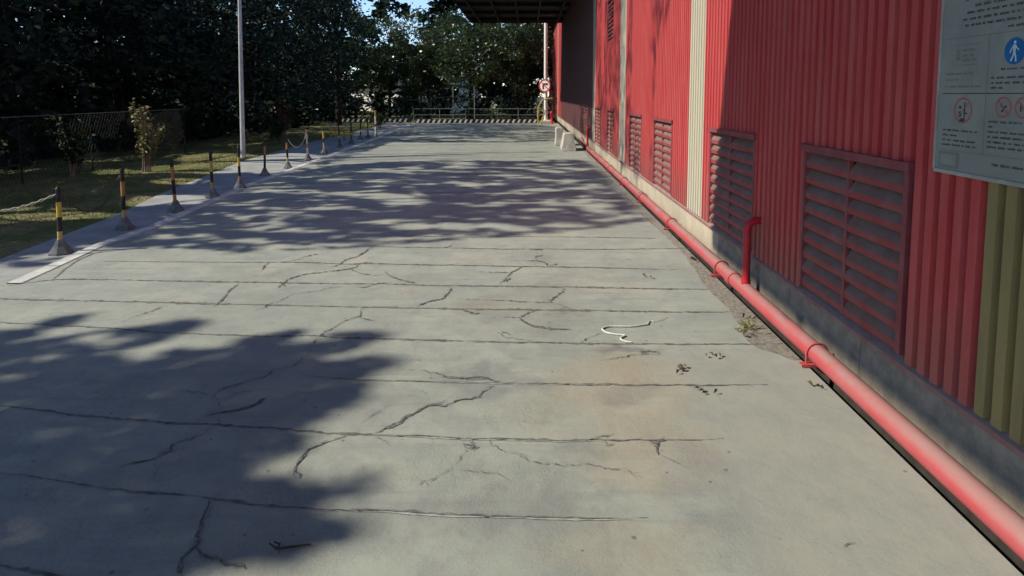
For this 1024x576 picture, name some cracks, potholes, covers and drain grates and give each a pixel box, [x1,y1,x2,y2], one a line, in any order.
crack [417,288,603,343]
crack [293,359,641,485]
crack [112,311,369,485]
crack [77,495,245,576]
crack [480,249,557,285]
